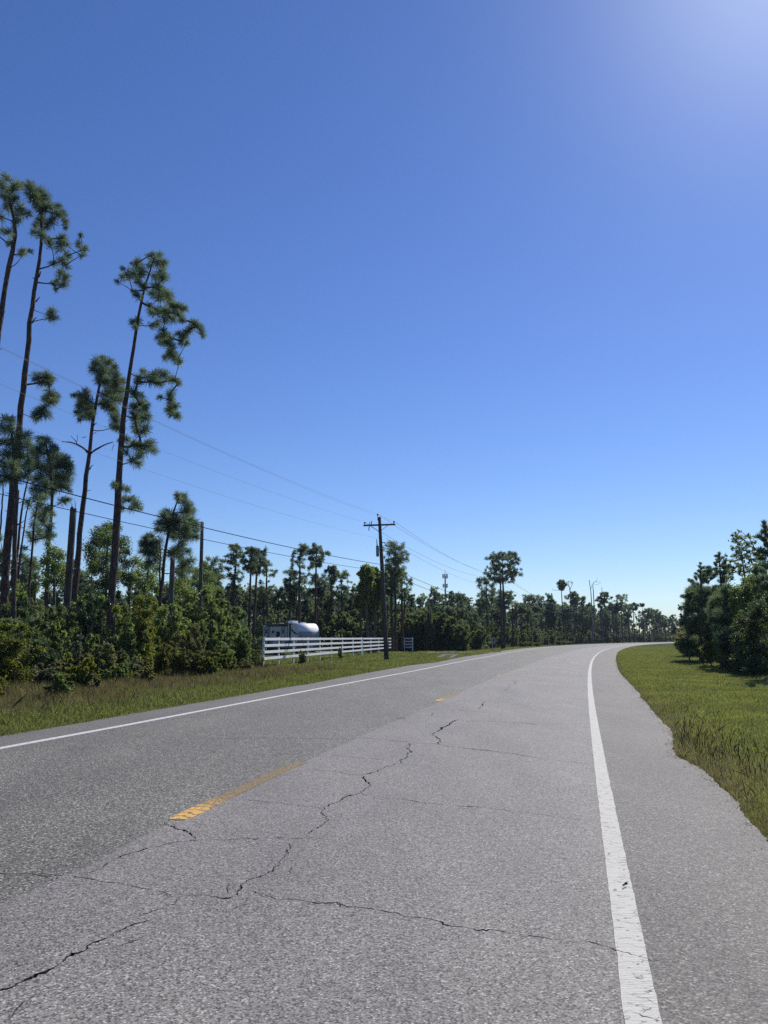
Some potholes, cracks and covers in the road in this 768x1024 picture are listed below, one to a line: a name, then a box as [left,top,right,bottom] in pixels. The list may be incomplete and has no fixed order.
crack [2,903,175,1022]
crack [103,701,544,866]
crack [224,890,661,961]
